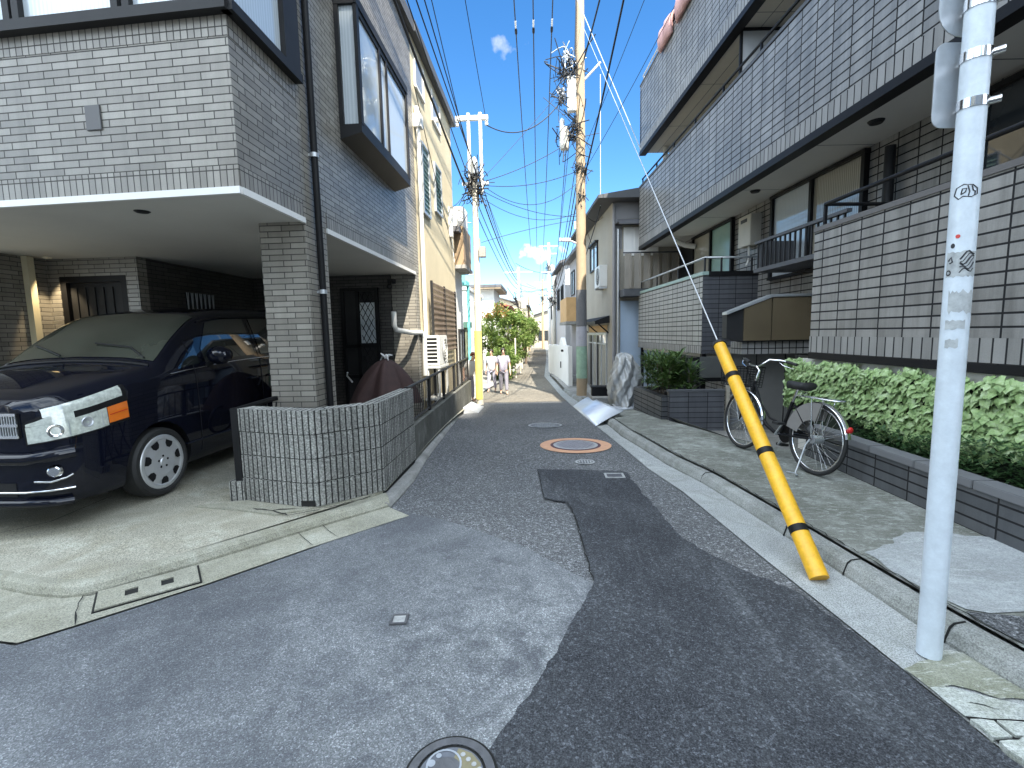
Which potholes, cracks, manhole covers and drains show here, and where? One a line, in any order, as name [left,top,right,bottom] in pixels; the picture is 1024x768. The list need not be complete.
manhole cover [540,438,611,453]
utility cover [389,613,409,626]
manhole cover [406,736,498,768]
crack [254,496,370,544]
